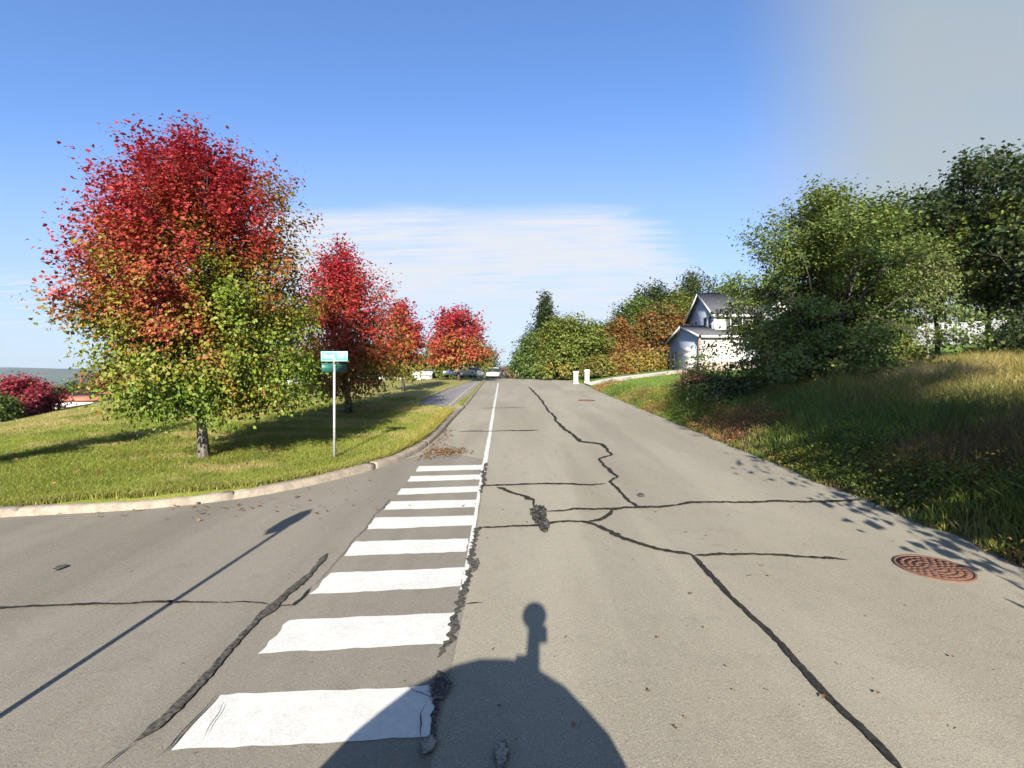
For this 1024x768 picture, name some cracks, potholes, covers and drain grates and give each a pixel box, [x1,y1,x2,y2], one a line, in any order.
manhole cover [893,554,978,583]
crack [693,552,849,560]
crack [482,387,860,522]
crack [0,588,310,609]
pothole [529,504,550,532]
